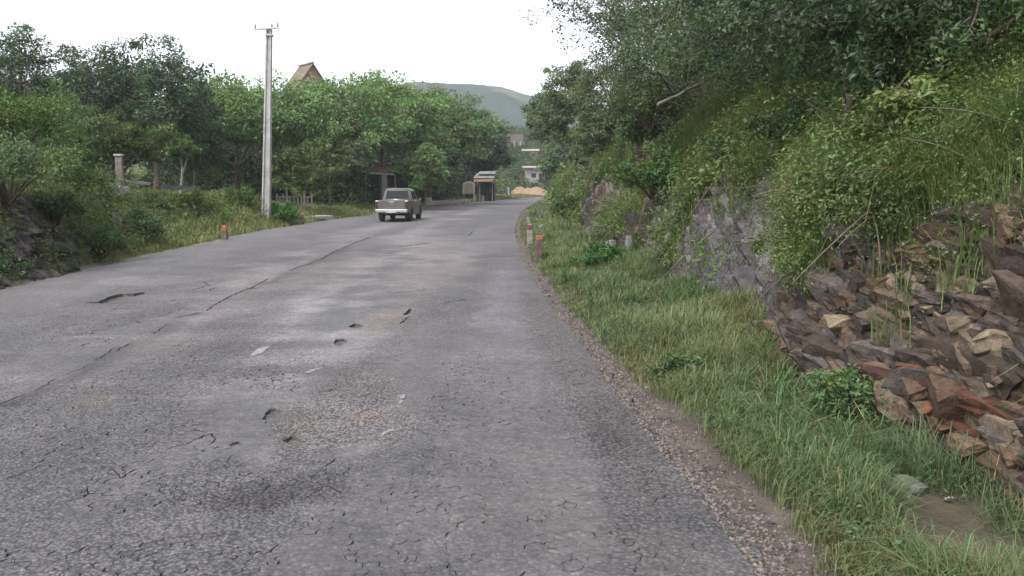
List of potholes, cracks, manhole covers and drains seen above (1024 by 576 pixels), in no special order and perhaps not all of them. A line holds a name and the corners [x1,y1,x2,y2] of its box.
pothole [282,436,304,446]
crack [0,340,307,481]
crack [262,444,527,576]
crack [503,480,704,576]
crack [0,532,289,576]
crack [34,403,259,526]
crack [39,282,217,353]
pothole [262,408,282,423]
crack [423,353,679,503]
